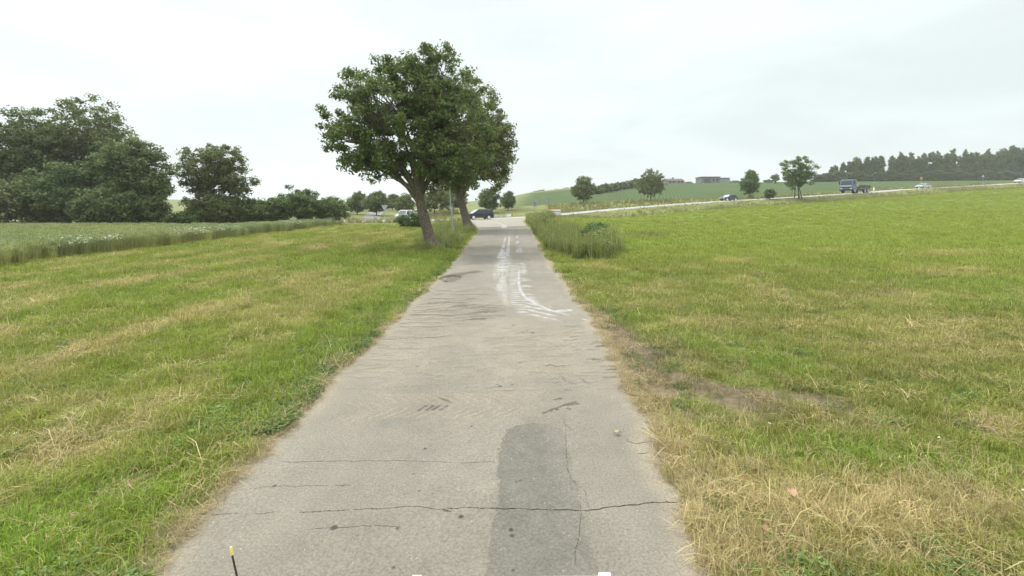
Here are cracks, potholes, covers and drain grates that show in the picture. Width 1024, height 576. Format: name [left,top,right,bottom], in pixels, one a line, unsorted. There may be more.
crack [212,420,677,565]
